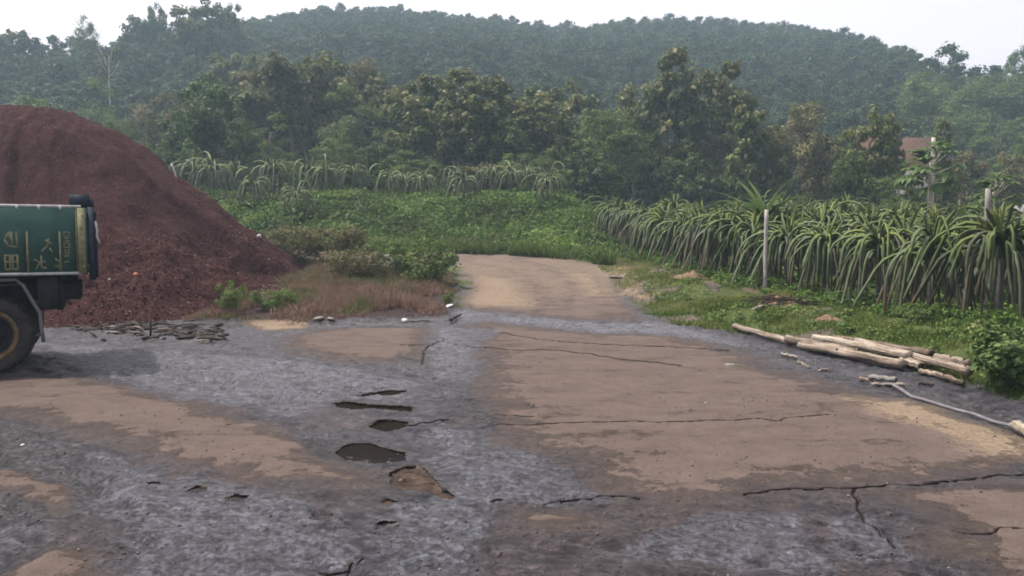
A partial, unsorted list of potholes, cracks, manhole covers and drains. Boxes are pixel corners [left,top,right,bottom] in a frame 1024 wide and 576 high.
crack [743,474,1024,548]
pothole [360,418,415,434]
crack [402,332,729,366]
pothole [374,497,407,509]
pothole [380,464,462,501]
pothole [215,491,258,503]
pothole [324,400,419,413]
pothole [136,478,169,487]
pothole [328,441,415,466]
crack [495,414,829,425]
pothole [177,483,219,496]
pothole [348,389,410,398]
